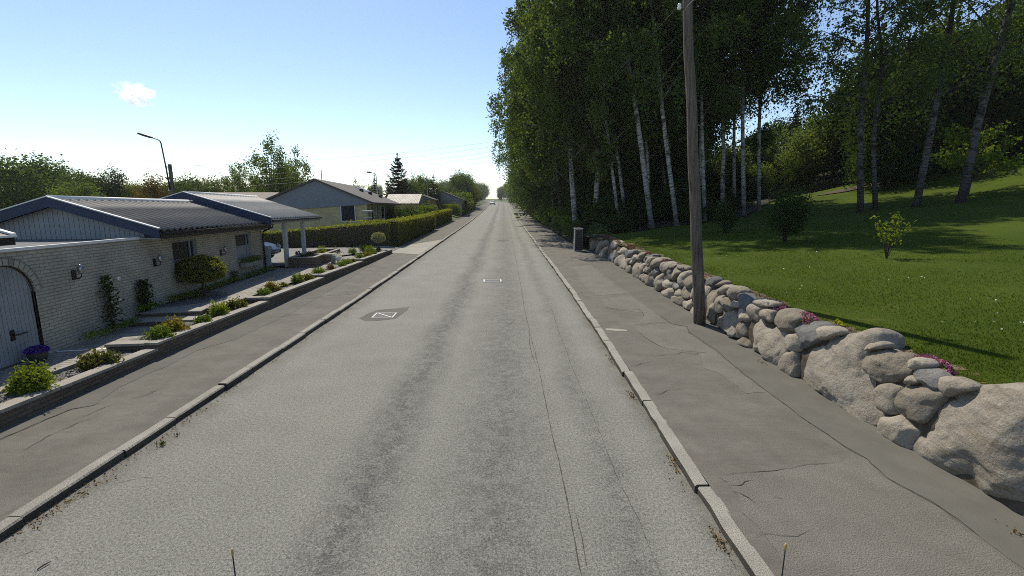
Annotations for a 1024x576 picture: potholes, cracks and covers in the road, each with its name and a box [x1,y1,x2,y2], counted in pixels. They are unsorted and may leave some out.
crack [0,403,114,450]
crack [638,316,978,535]
crack [552,311,662,576]
